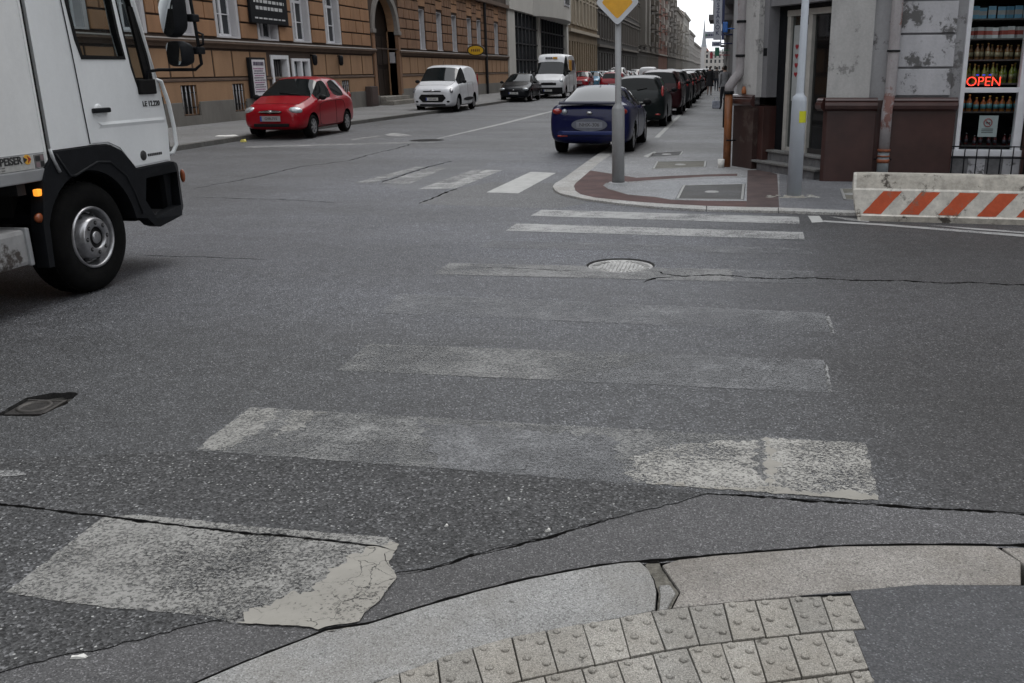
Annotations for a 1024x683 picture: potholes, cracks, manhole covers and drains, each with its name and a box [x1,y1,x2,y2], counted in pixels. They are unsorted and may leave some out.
manhole cover [4,399,68,416]
crack [0,503,614,575]
manhole cover [676,184,745,200]
manhole cover [586,258,655,272]
manhole cover [652,161,707,169]
crack [643,272,1024,285]
